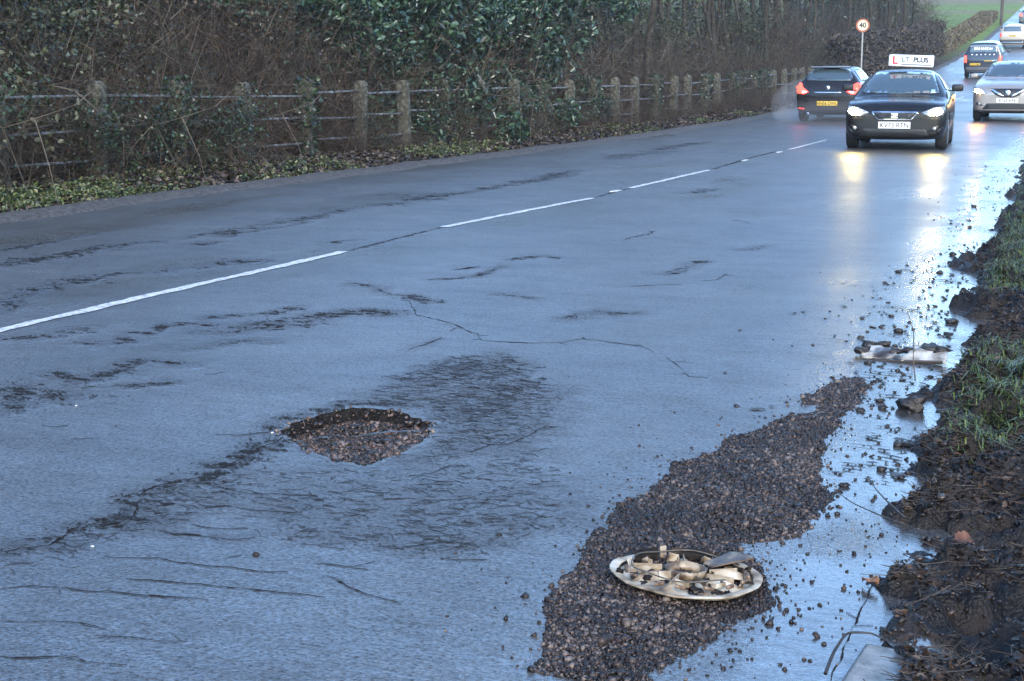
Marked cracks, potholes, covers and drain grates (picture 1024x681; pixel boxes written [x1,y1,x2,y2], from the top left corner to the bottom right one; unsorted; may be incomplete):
pothole [270,405,442,469]
crack [0,256,653,604]
